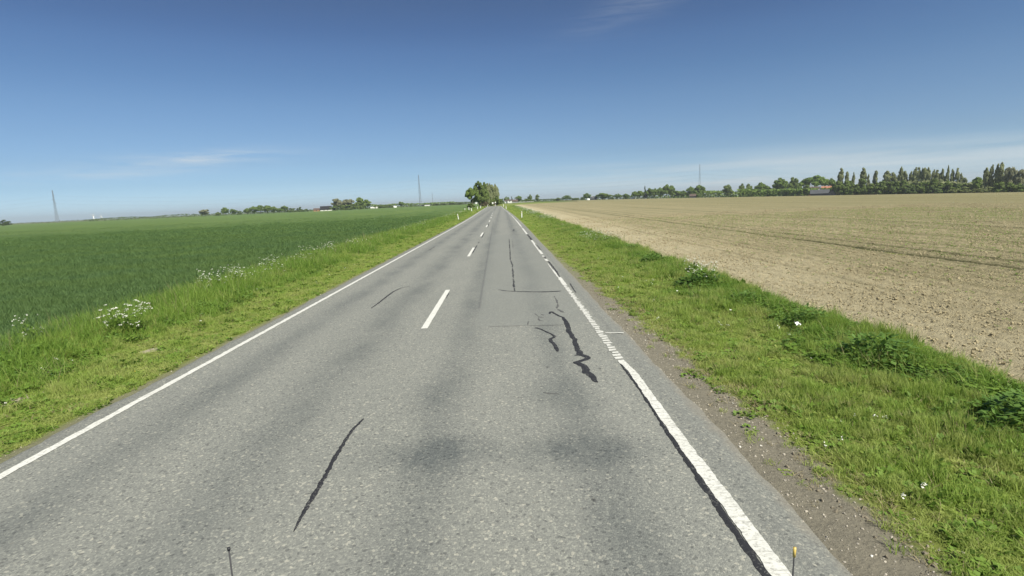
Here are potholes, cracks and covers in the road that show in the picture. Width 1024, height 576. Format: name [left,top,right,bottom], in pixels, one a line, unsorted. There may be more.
crack [498,229,576,326]
